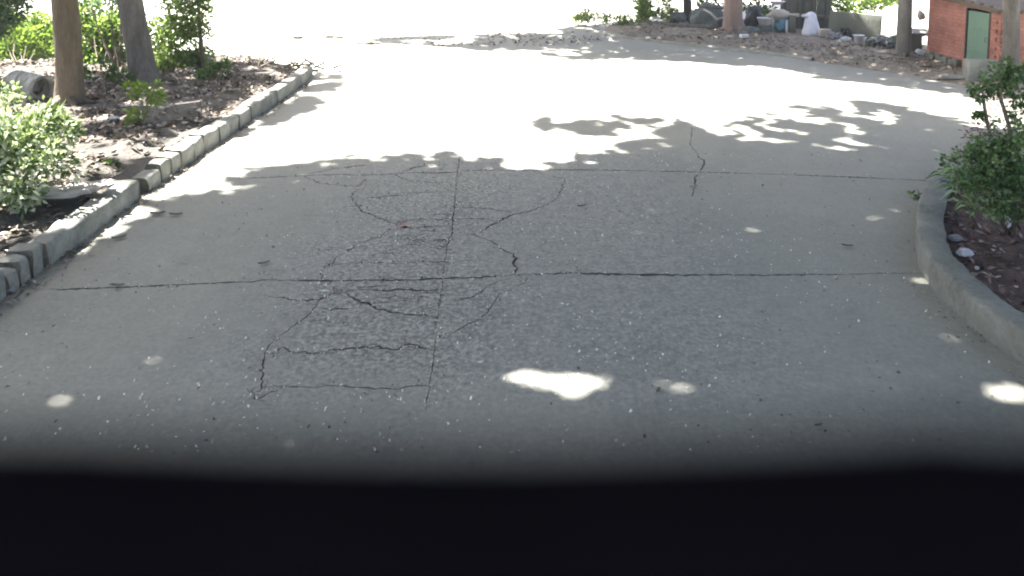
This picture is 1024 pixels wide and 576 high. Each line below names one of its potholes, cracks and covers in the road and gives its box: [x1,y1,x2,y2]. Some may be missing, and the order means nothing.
crack [73,125,913,402]
